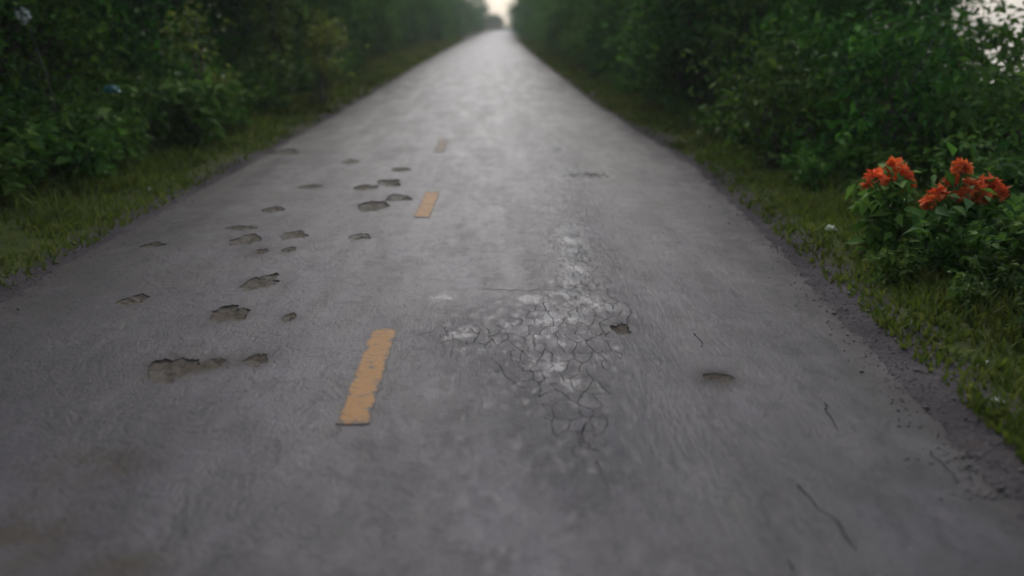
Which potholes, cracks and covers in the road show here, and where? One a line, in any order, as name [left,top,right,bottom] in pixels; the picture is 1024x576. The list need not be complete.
pothole [203,357,226,369]
pothole [358,201,391,212]
pothole [228,233,262,246]
pothole [115,293,149,306]
pothole [610,324,632,335]
pothole [240,273,280,291]
pothole [147,357,200,384]
crack [419,244,639,475]
pothole [209,304,251,324]
pothole [242,354,268,369]
pothole [280,230,308,241]
pothole [385,194,413,202]
